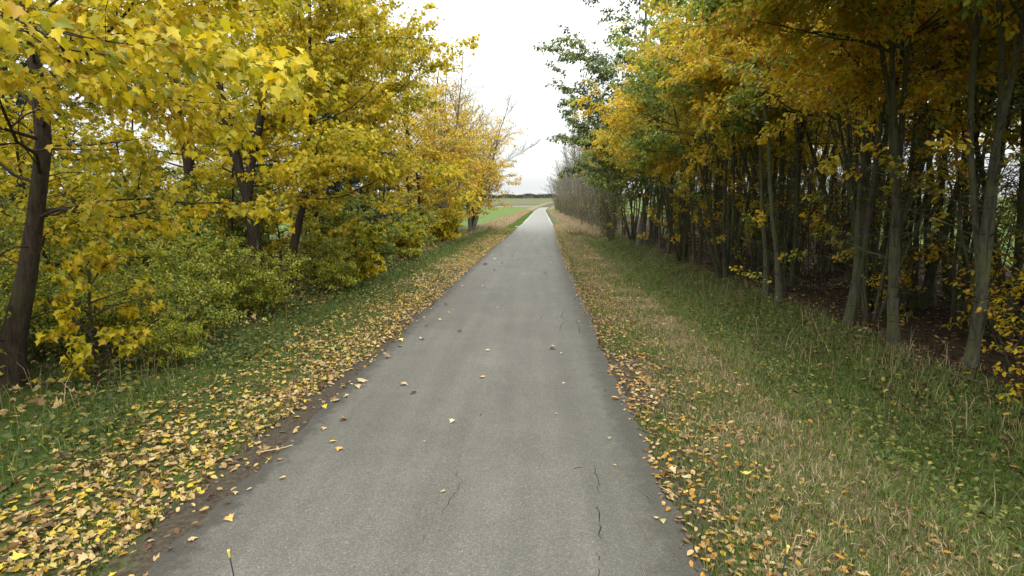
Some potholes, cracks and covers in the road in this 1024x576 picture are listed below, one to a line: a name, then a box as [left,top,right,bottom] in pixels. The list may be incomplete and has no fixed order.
crack [593,465,605,576]
